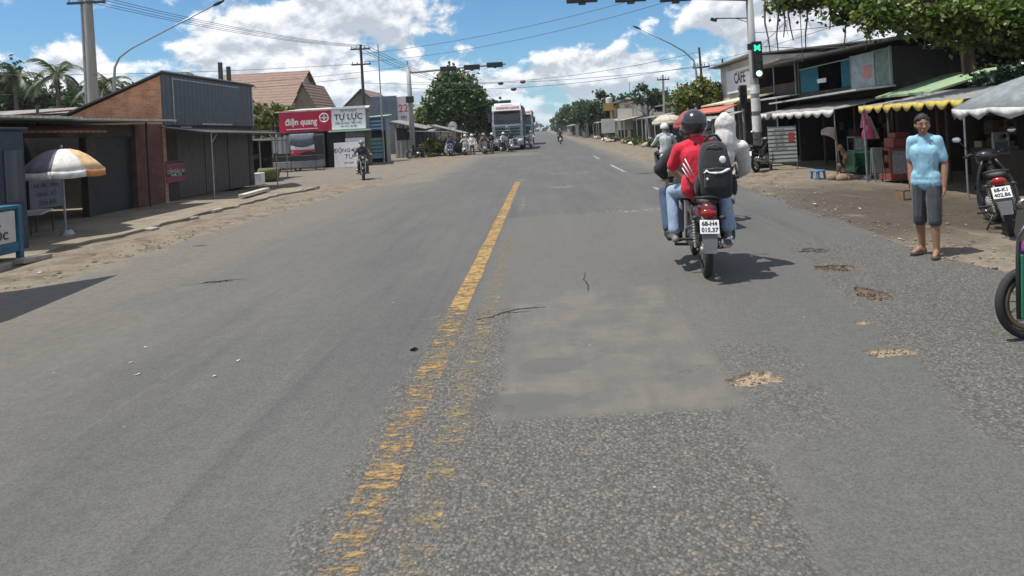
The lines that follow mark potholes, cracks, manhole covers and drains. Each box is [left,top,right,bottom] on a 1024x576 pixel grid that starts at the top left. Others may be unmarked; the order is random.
pothole [724,371,785,387]
pothole [854,286,894,301]
pothole [863,348,918,358]
